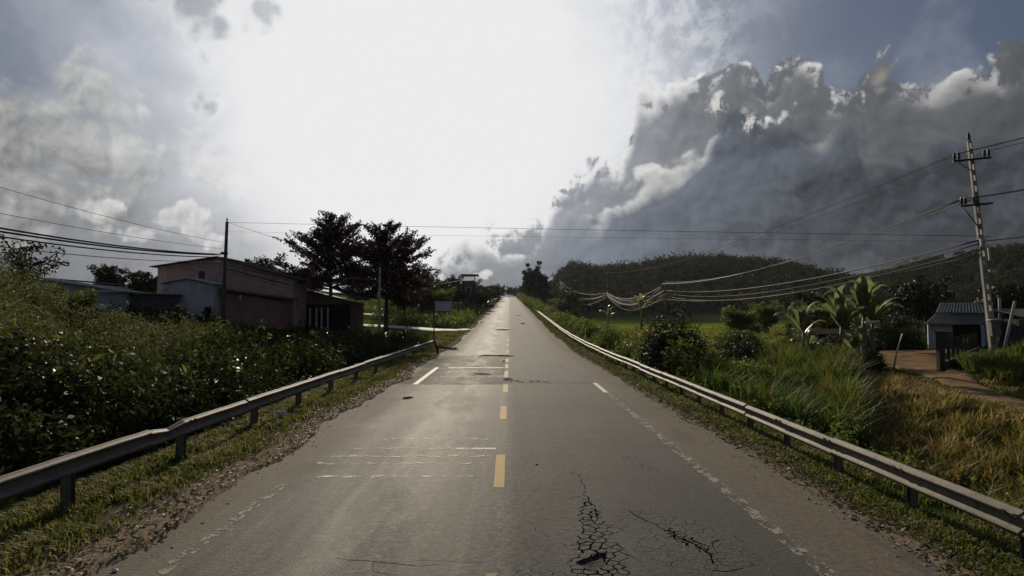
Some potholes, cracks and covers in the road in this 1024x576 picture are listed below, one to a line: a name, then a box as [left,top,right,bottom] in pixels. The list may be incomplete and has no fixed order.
pothole [575,552,607,571]
crack [512,472,760,576]
